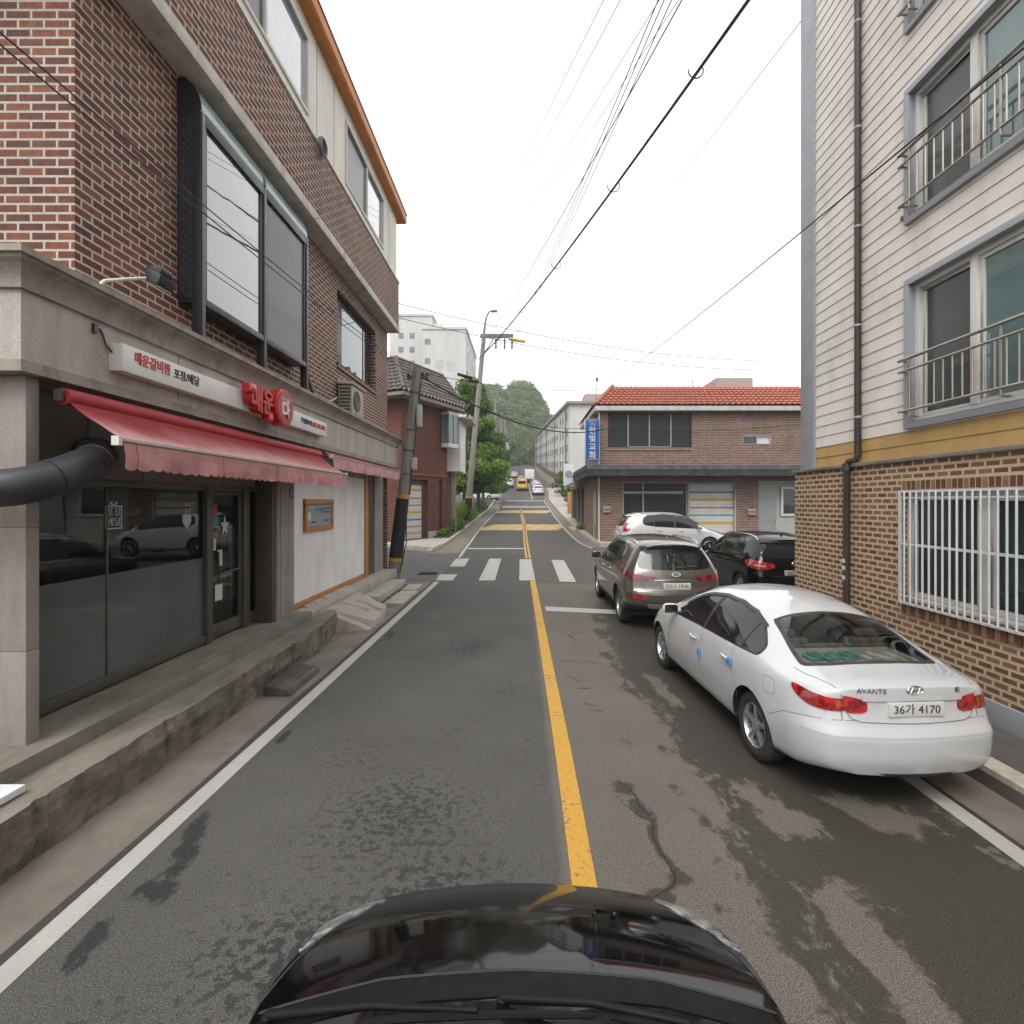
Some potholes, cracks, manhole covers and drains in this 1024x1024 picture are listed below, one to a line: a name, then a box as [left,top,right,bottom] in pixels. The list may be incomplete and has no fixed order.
crack [618,782,676,897]
